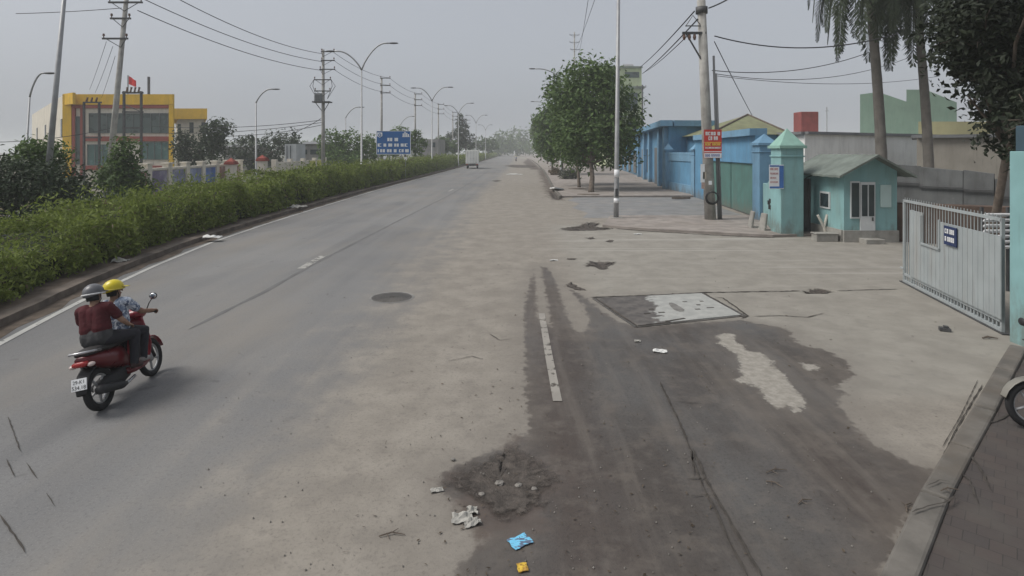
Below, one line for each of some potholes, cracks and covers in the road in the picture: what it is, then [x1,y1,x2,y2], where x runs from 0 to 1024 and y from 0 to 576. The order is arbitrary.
crack [0,515,25,552]
manhole cover [369,292,415,303]
pothole [562,222,609,231]
pothole [586,261,615,269]
crack [660,381,761,576]
pothole [443,445,558,520]
crack [942,380,991,502]
crack [7,417,55,506]
